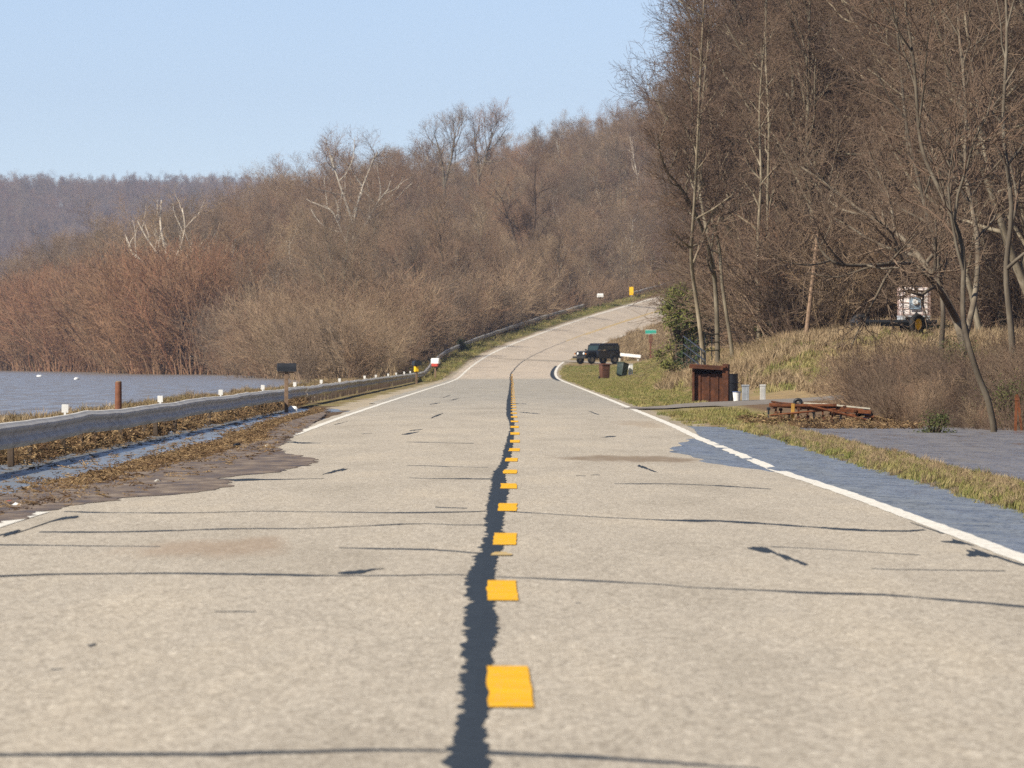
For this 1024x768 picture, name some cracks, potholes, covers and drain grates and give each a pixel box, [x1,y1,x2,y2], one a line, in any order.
crack [488,750,748,768]
crack [0,748,454,756]
crack [0,507,486,547]
crack [506,511,1004,571]
crack [0,572,1024,608]
